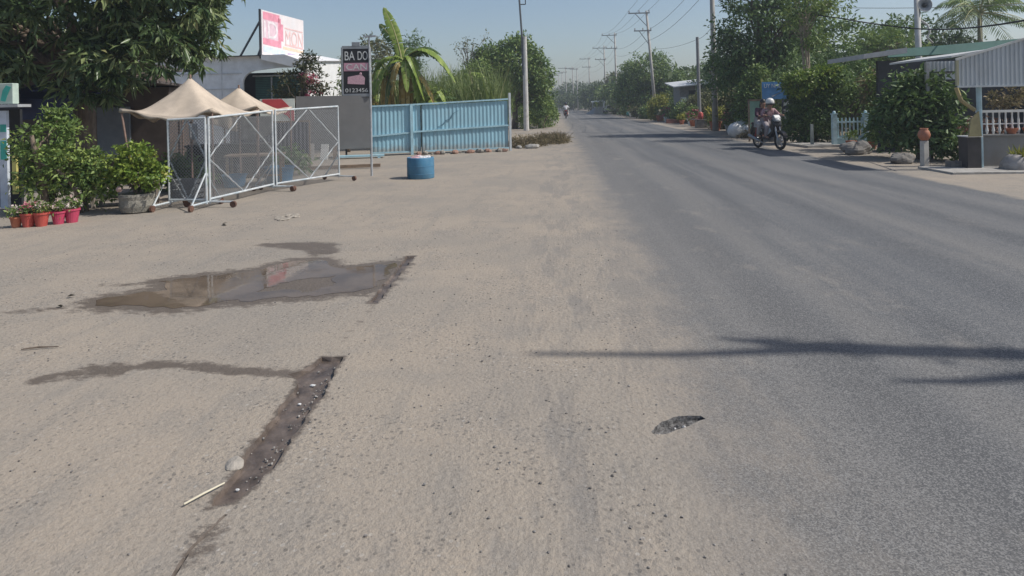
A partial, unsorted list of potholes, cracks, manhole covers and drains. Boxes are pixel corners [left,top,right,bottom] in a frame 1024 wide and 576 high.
crack [171,514,228,576]
pothole [651,416,705,434]
